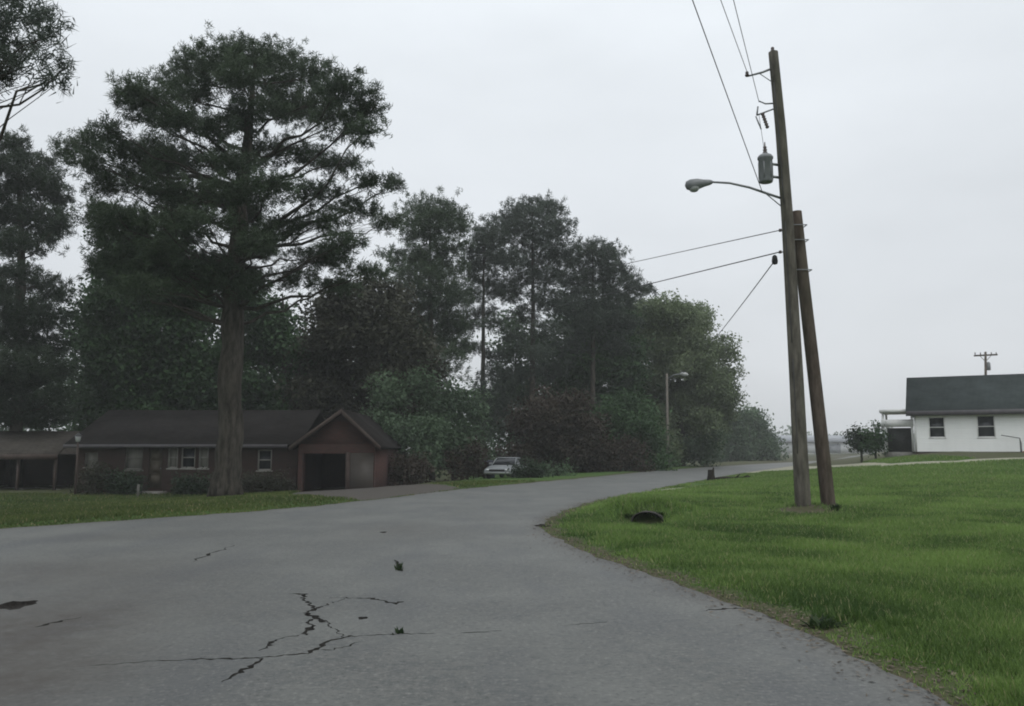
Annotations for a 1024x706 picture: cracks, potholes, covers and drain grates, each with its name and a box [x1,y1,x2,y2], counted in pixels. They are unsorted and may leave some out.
crack [93,593,432,682]
pothole [0,600,38,610]
